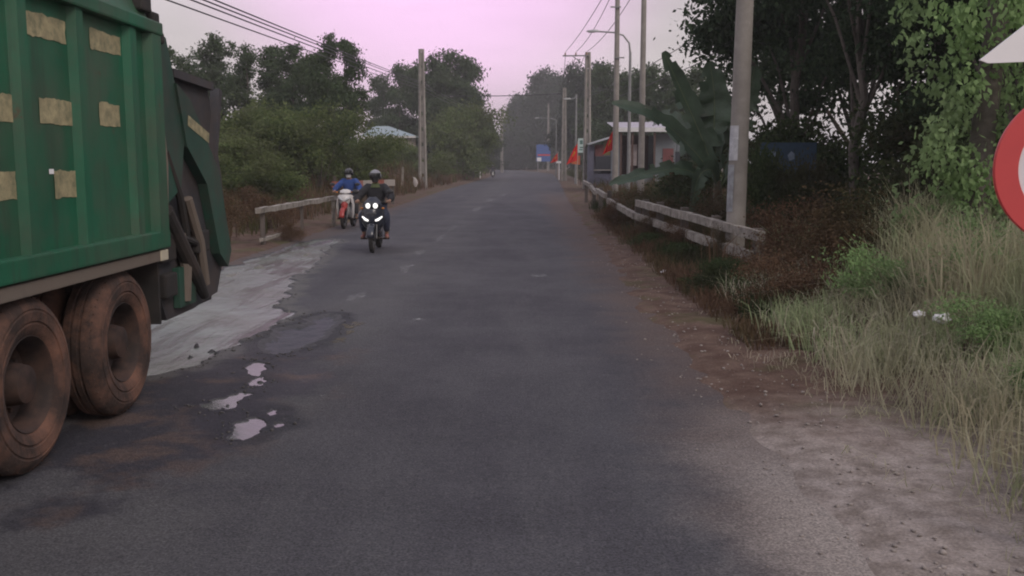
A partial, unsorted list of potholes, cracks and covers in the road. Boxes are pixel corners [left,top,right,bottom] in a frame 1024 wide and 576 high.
pothole [199,390,254,411]
pothole [226,416,270,440]
pothole [244,361,271,386]
